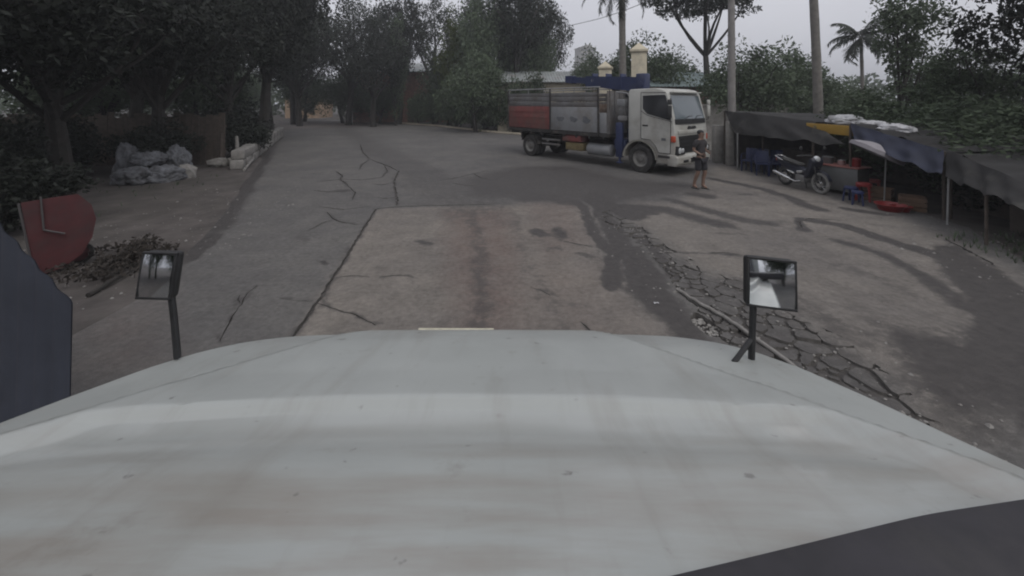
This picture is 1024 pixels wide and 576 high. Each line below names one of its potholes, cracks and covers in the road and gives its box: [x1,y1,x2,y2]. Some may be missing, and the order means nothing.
crack [596,210,935,426]
crack [220,286,257,342]
crack [281,298,375,325]
crack [310,146,400,230]
